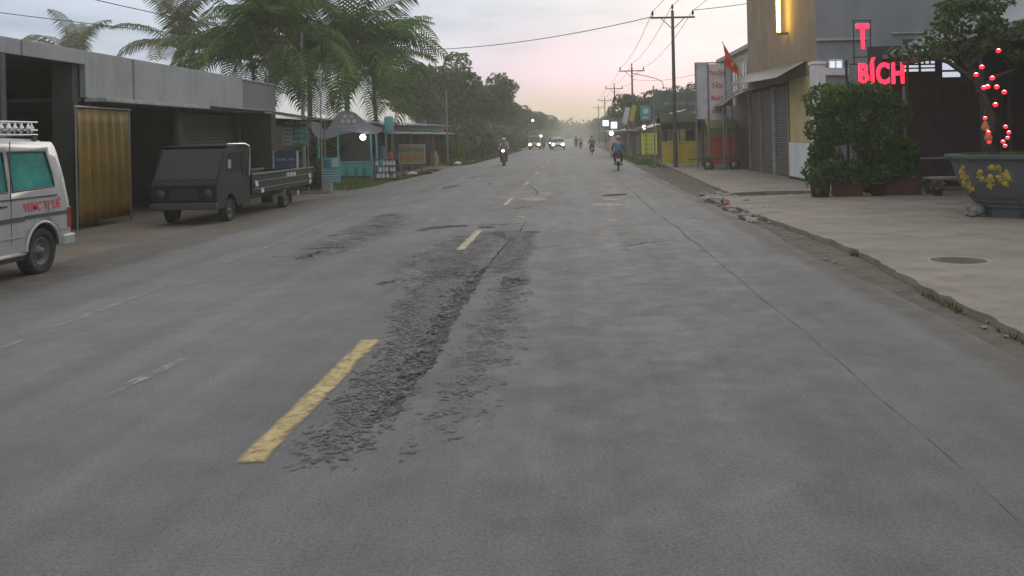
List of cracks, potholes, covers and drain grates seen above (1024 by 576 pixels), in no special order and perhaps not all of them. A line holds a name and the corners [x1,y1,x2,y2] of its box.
manhole cover [926,256,992,265]
pothole [360,267,488,423]
crack [413,185,539,274]
pothole [499,276,530,291]
